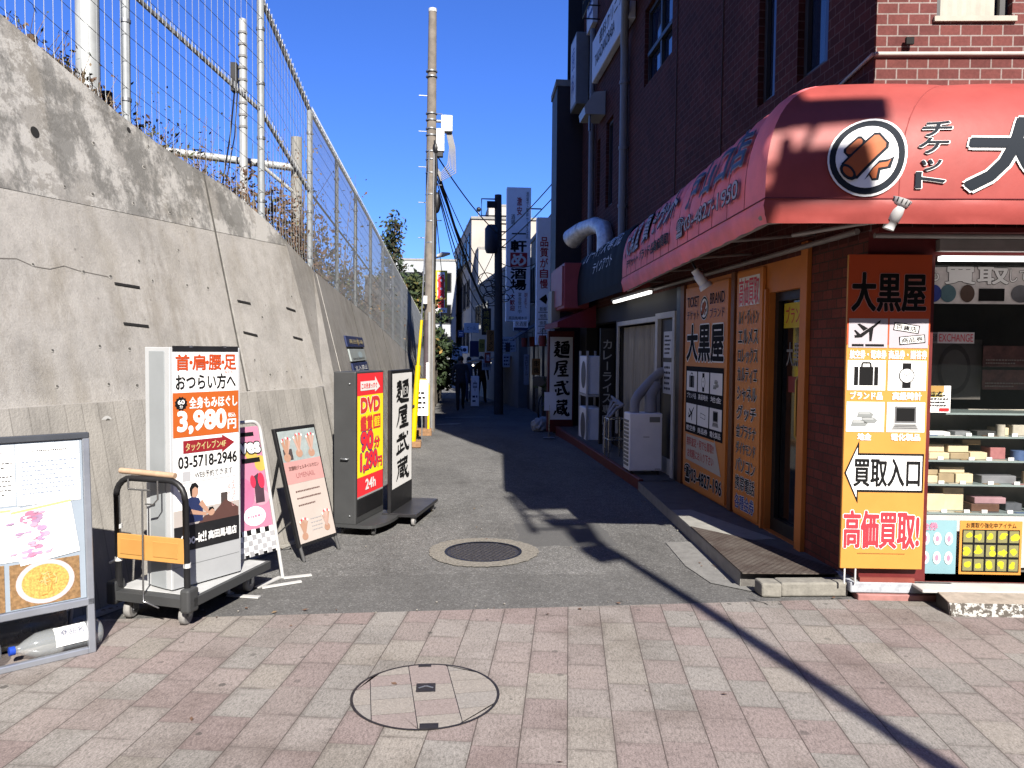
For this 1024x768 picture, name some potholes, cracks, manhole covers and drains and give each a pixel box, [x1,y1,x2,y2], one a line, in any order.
manhole cover [350,664,500,730]
manhole cover [429,538,539,567]
